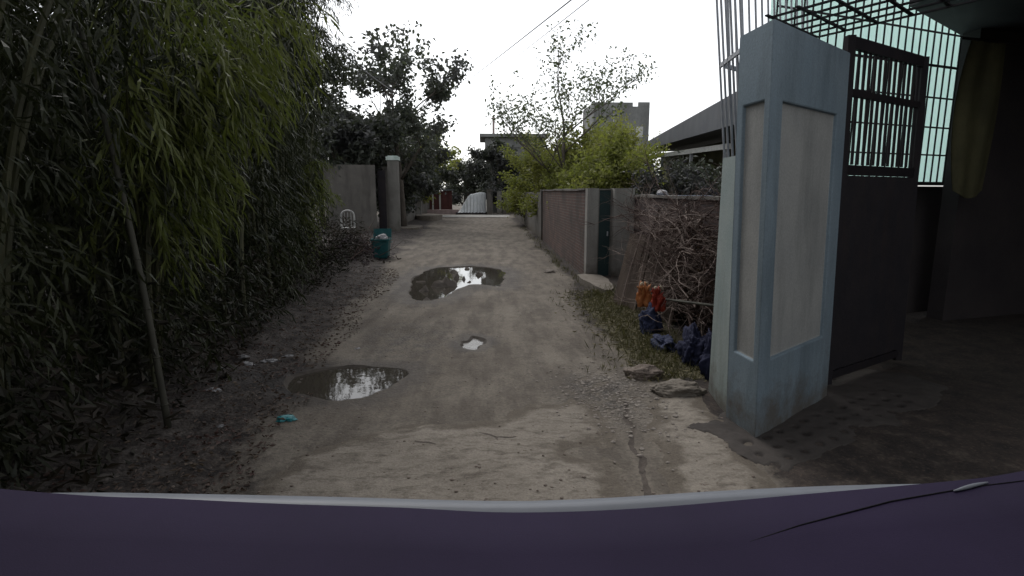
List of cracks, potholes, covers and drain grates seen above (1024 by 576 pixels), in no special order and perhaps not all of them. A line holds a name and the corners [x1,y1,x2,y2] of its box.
pothole [284,365,409,401]
pothole [460,336,487,350]
pothole [408,266,506,301]
crack [622,400,652,496]
